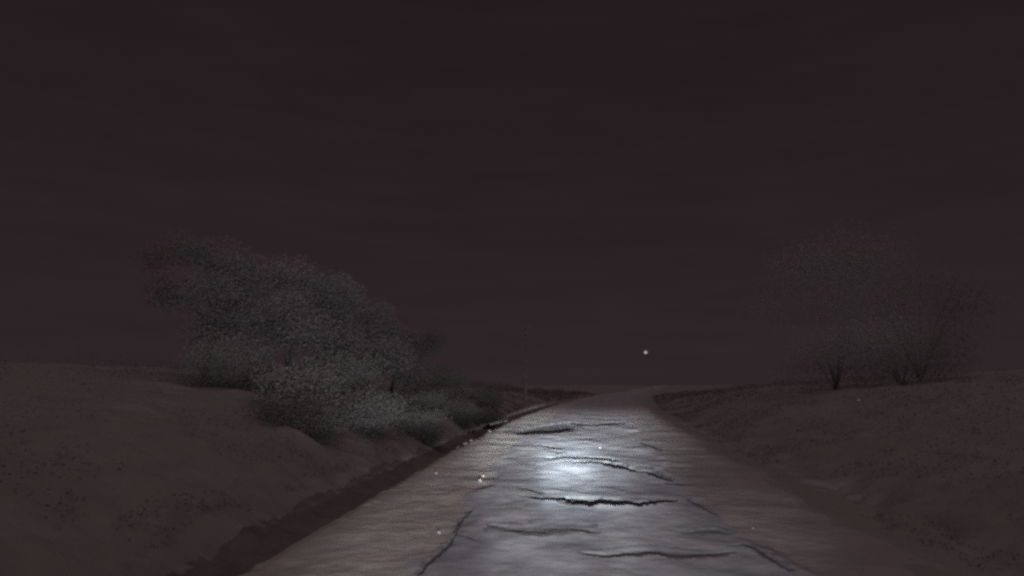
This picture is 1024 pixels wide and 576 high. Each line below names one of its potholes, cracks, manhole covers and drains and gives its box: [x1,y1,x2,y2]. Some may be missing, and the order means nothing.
crack [504,421,797,572]
crack [414,507,482,575]
